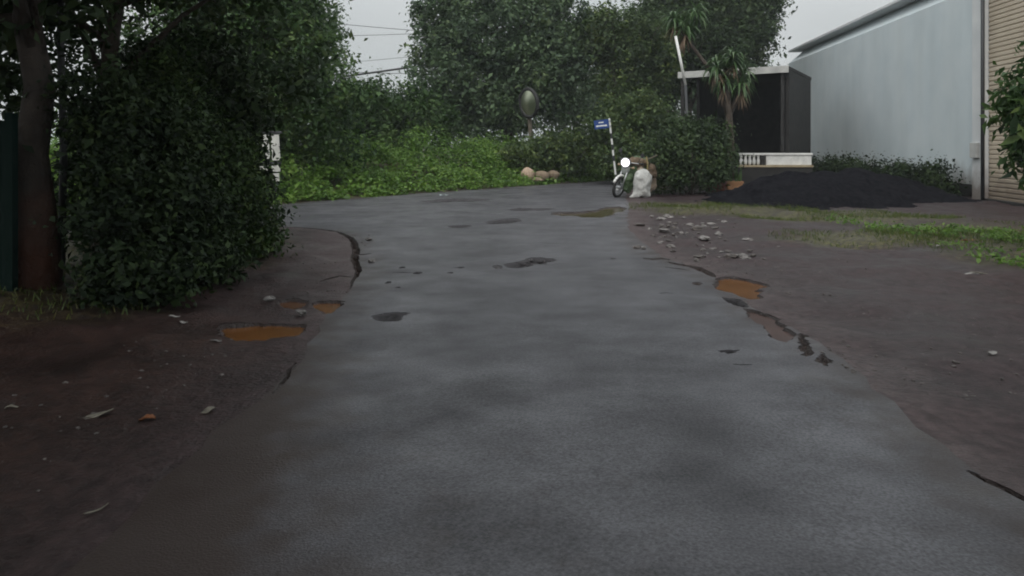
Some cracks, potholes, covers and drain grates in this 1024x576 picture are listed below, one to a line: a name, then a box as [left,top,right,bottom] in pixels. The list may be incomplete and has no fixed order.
pothole [815,353,832,366]
crack [967,471,1024,501]
pothole [371,312,410,322]
pothole [551,207,627,218]
pothole [798,334,814,356]
pothole [744,309,797,343]
pothole [713,277,769,299]
pothole [275,299,309,309]
pothole [217,323,307,341]
pothole [311,301,345,314]
crack [295,227,367,289]
pothole [493,257,556,269]
